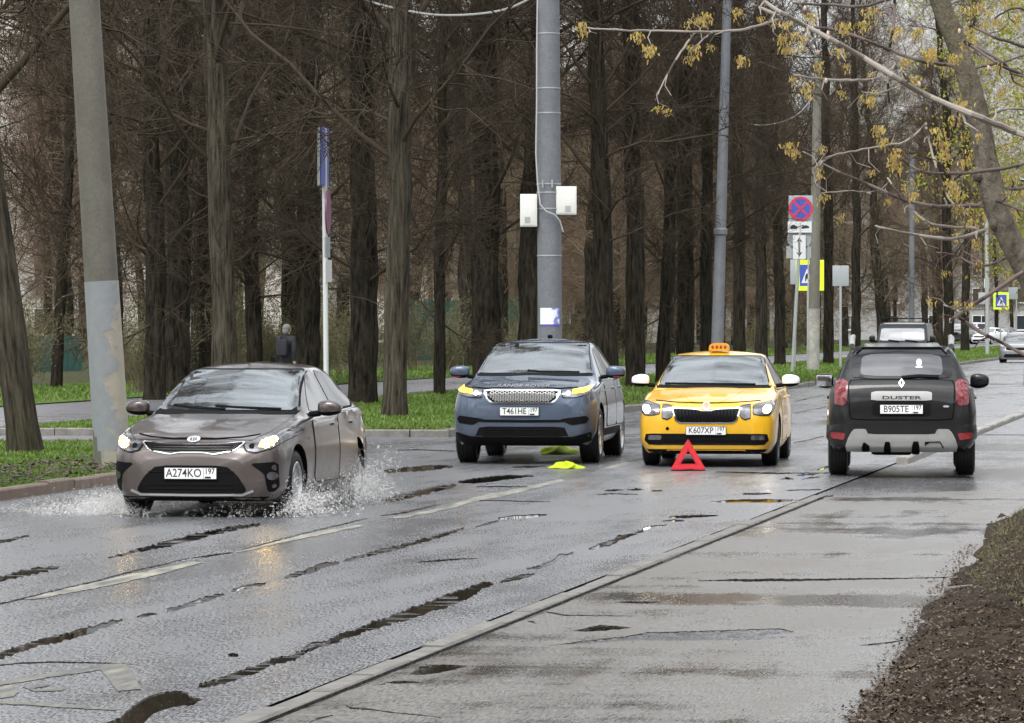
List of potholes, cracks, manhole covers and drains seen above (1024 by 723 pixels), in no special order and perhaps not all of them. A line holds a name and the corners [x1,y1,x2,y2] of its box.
pothole [410,664,467,675]
pothole [0,618,123,659]
pothole [107,691,202,723]
pothole [167,593,225,613]
pothole [384,465,453,473]
pothole [0,566,60,582]
pothole [589,530,644,550]
pothole [198,647,310,688]
pothole [283,561,339,579]
pothole [137,523,260,552]
pothole [303,582,493,653]
pothole [458,475,534,484]
